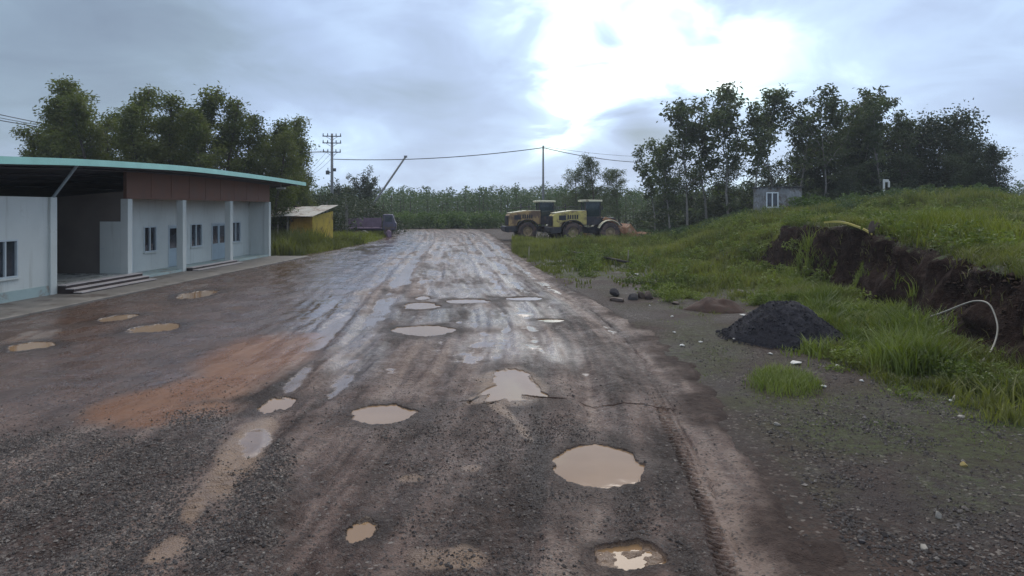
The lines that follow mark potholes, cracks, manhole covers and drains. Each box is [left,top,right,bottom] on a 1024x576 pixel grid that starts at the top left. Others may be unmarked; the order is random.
pothole [538,439,660,495]
pothole [528,316,575,325]
crack [522,394,679,413]
pothole [243,393,309,418]
pothole [0,340,68,354]
pothole [393,301,451,311]
pothole [337,400,431,429]
pothole [85,313,151,324]
pothole [328,512,395,553]
pothole [437,298,502,306]
pothole [577,531,687,576]
pothole [113,322,192,335]
